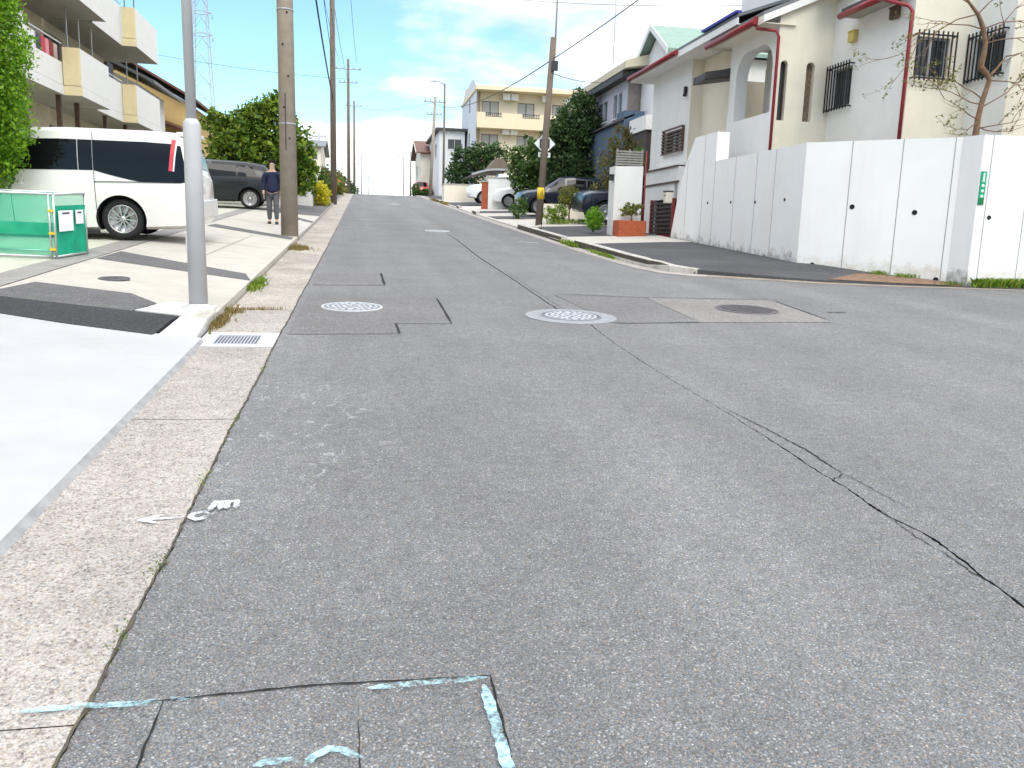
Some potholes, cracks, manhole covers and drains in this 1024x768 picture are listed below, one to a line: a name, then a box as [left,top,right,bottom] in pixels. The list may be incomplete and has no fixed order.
manhole cover [525,309,617,325]
manhole cover [321,302,383,312]
crack [451,236,1024,608]
manhole cover [715,305,779,315]
drain grate [200,332,280,348]
